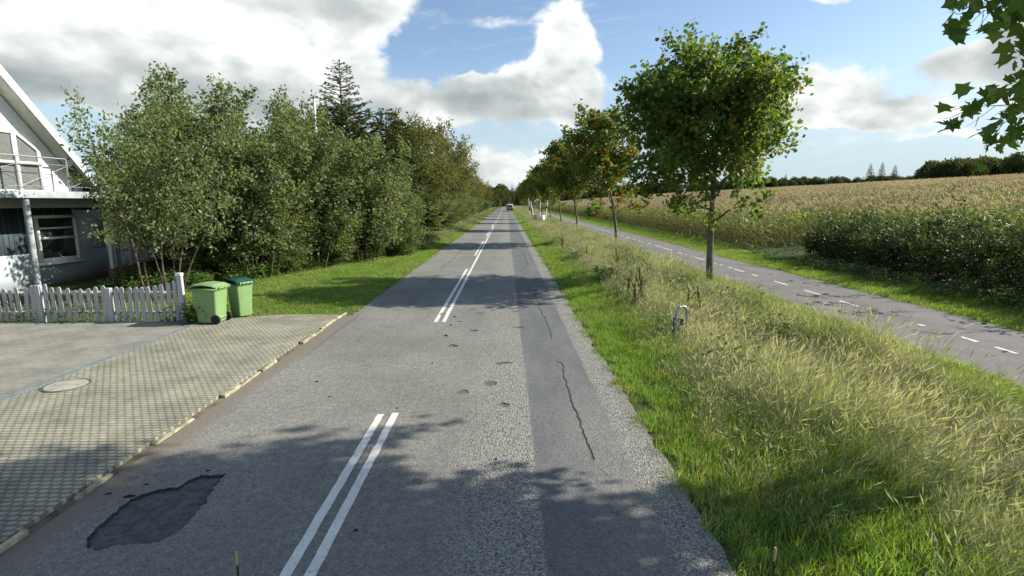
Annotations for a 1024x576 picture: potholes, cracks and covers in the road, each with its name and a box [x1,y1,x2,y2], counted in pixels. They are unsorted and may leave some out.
manhole cover [40,378,92,393]
crack [557,361,610,478]
